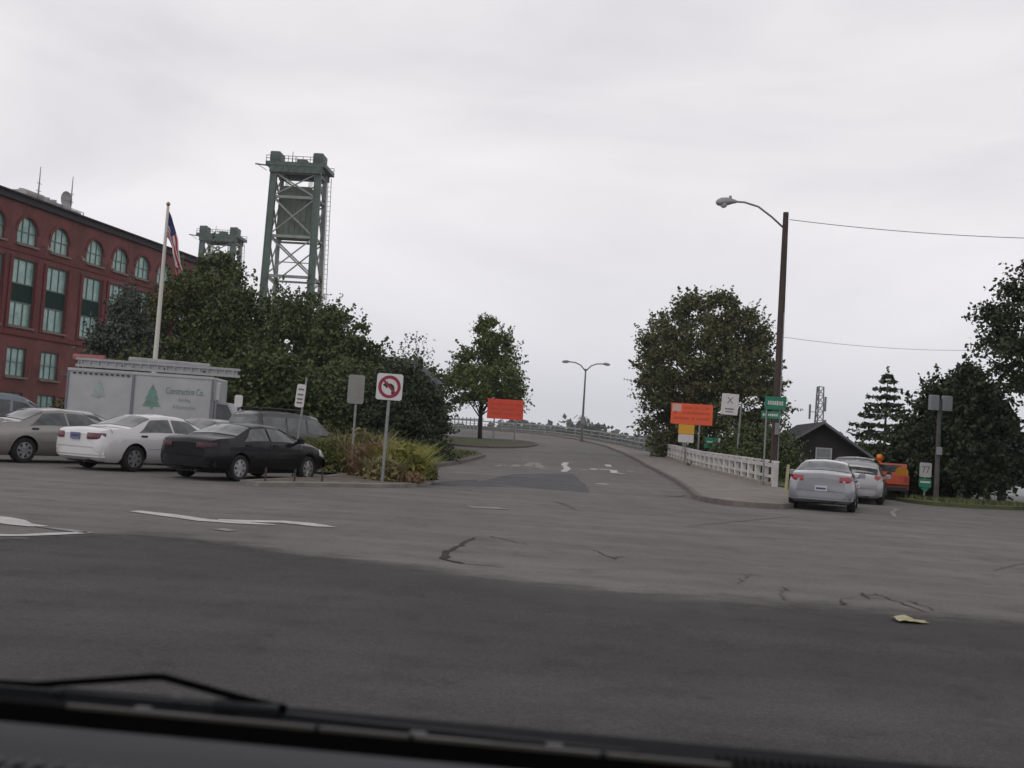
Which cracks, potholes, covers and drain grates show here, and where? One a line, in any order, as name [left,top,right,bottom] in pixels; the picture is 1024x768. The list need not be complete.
crack [839,592,933,612]
crack [438,536,526,567]
